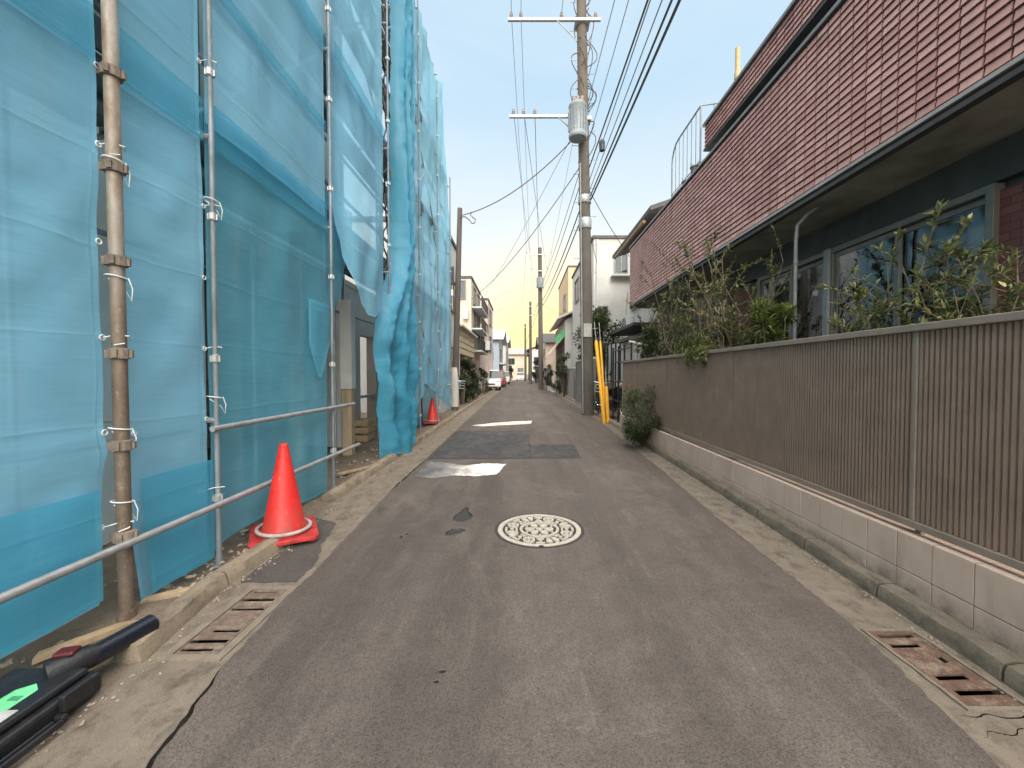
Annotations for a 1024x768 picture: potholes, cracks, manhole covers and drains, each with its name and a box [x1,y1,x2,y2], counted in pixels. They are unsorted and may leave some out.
pothole [453,507,473,522]
manhole cover [495,513,584,548]
crack [961,713,1024,738]
